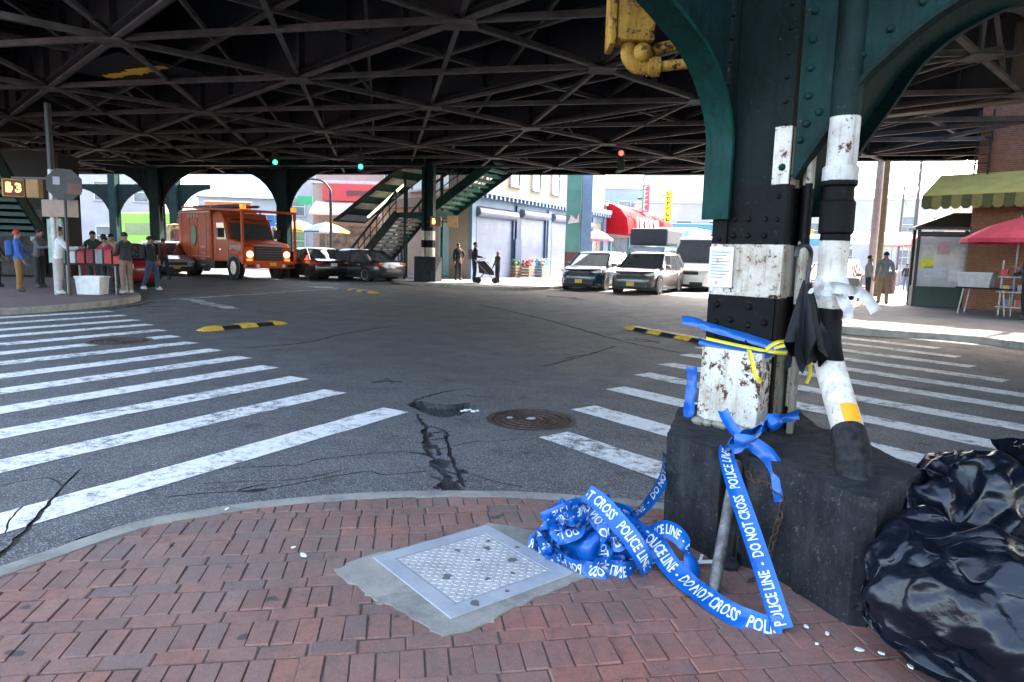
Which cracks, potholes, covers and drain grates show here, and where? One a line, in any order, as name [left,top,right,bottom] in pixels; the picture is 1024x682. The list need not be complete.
crack [0,469,81,558]
utility cover [373,525,574,619]
crack [166,378,522,497]
pothole [407,401,476,418]
manhole cover [487,409,576,431]
